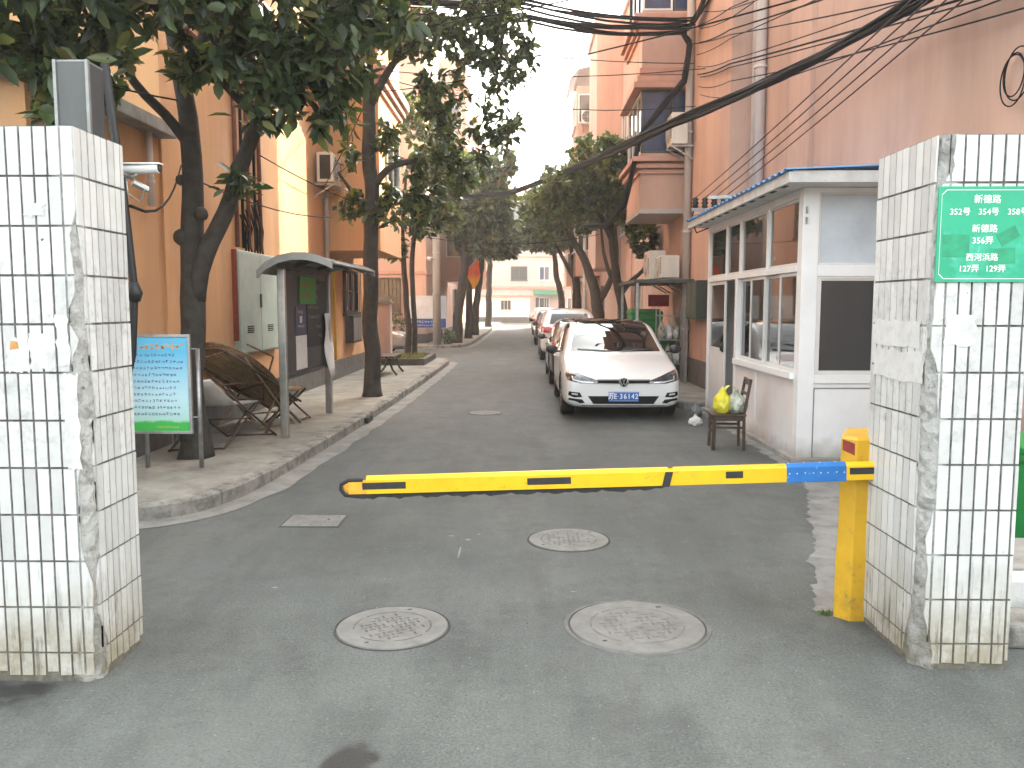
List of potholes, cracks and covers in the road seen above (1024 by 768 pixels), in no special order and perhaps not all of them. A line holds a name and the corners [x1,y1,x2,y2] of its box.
manhole cover [564,600,712,656]
manhole cover [279,515,348,528]
manhole cover [333,606,451,651]
manhole cover [527,528,610,552]
